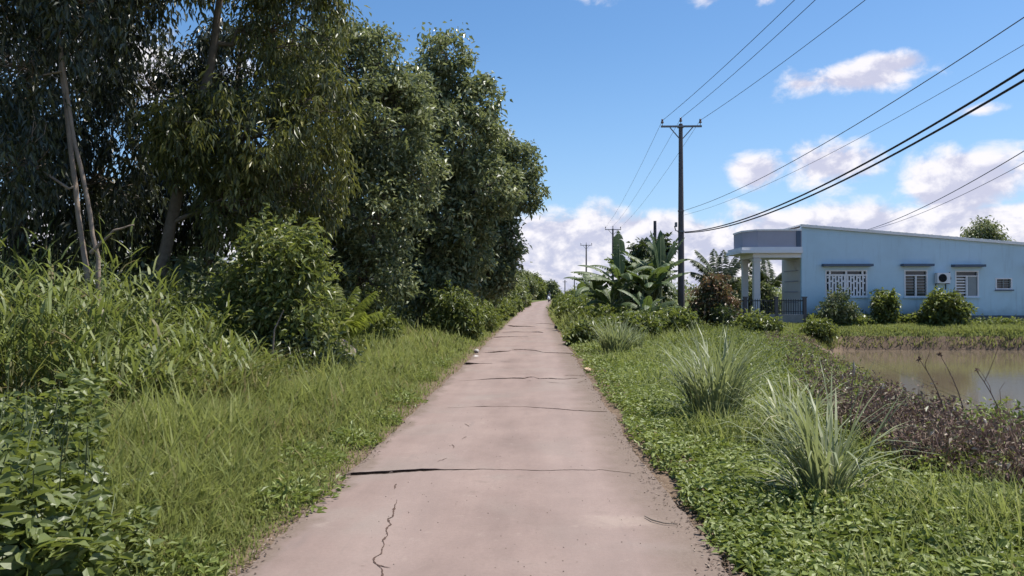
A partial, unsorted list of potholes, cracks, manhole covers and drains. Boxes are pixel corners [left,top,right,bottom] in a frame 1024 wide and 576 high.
crack [351,406,627,576]
crack [466,323,582,383]
